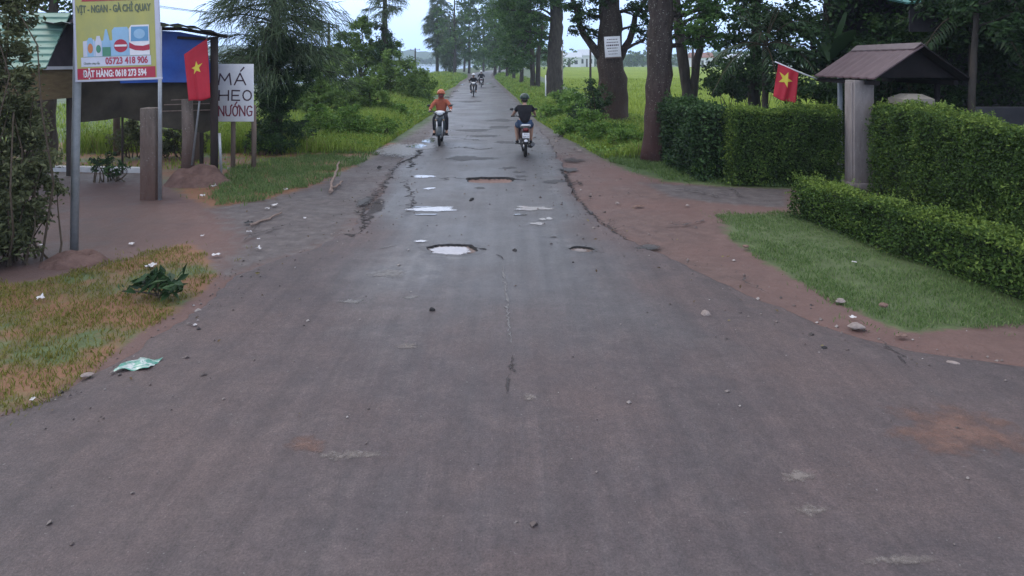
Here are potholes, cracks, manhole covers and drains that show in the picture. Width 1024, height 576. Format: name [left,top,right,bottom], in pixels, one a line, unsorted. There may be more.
pothole [458,176,522,184]
pothole [418,243,485,257]
crack [560,168,634,242]
crack [348,150,423,250]
crack [506,355,516,393]
pothole [565,245,598,253]
